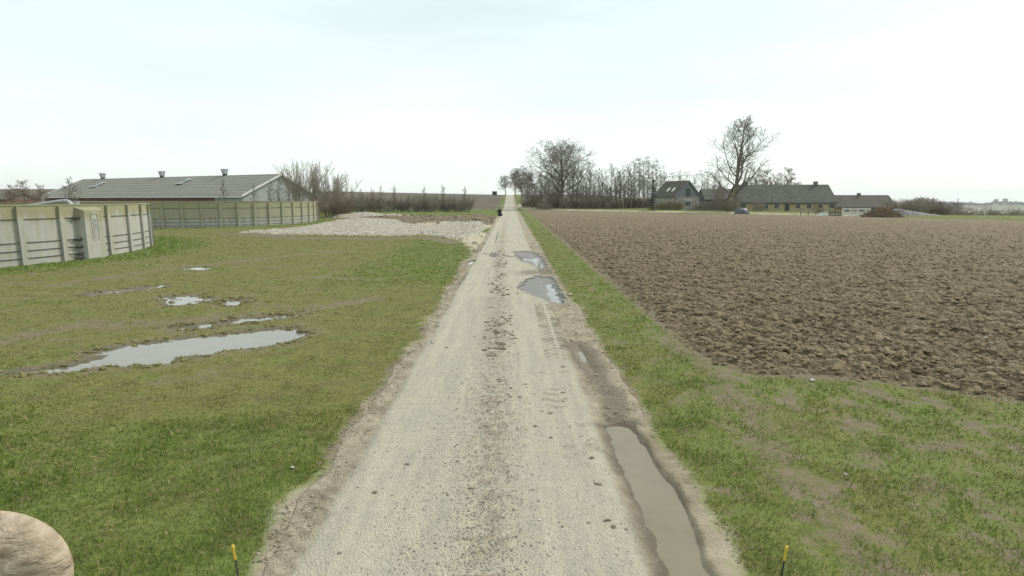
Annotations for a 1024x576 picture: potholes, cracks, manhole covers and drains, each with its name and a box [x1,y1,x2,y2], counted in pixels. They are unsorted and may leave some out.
pothole [518,276,565,303]
pothole [514,251,548,269]
